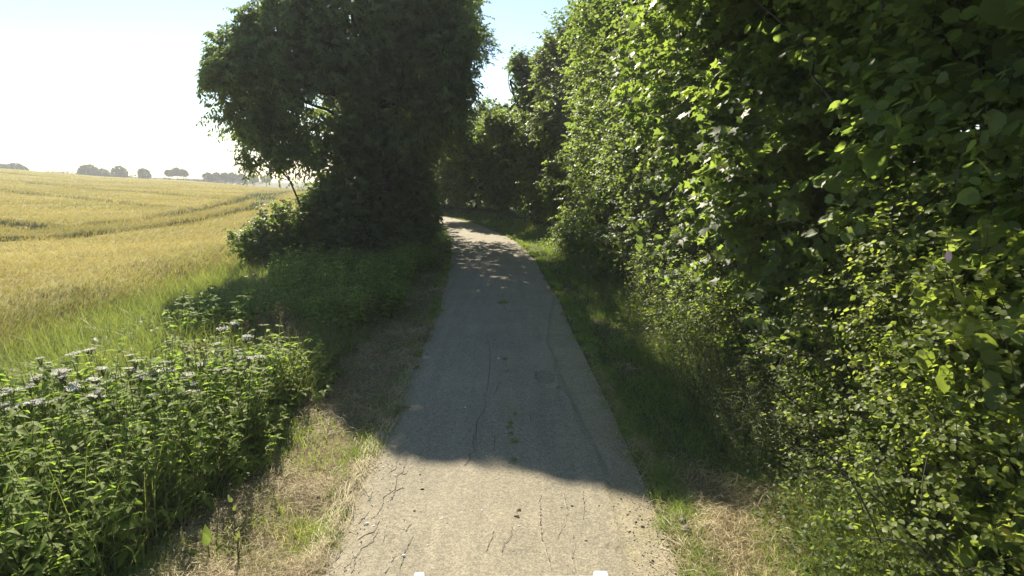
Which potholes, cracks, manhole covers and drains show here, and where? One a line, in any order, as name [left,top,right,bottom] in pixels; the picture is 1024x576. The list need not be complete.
crack [539,491,586,572]
crack [487,528,513,555]
crack [324,459,414,573]
crack [453,330,516,465]
